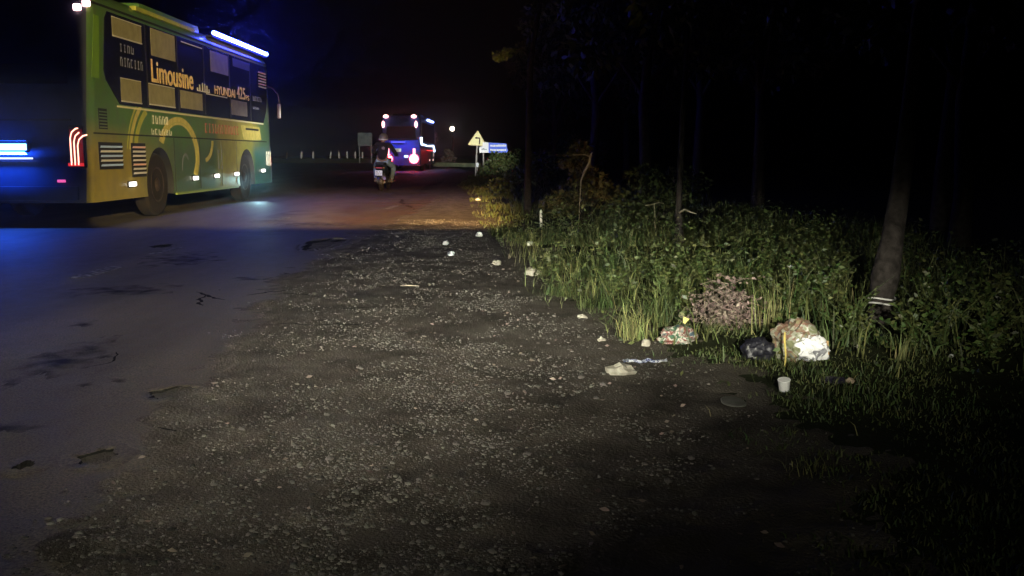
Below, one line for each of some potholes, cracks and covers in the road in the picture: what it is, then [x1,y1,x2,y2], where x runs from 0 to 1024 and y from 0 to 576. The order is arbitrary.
crack [196,292,225,305]
pothole [132,383,209,404]
pothole [298,238,353,251]
